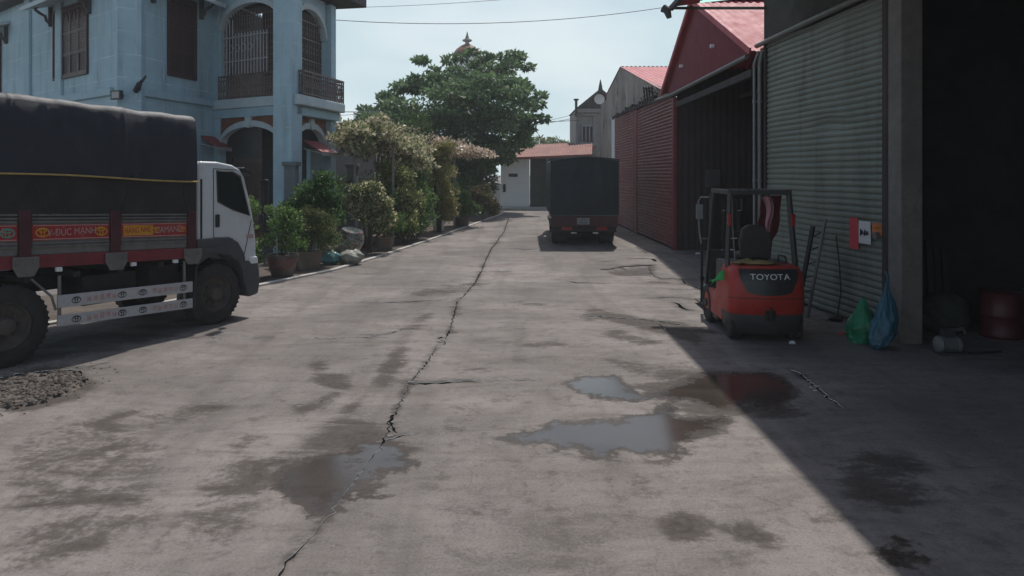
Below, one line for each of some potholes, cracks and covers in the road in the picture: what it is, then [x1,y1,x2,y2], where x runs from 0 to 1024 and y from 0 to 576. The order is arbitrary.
pothole [0,364,118,416]
crack [790,369,842,407]
crack [597,258,699,329]
